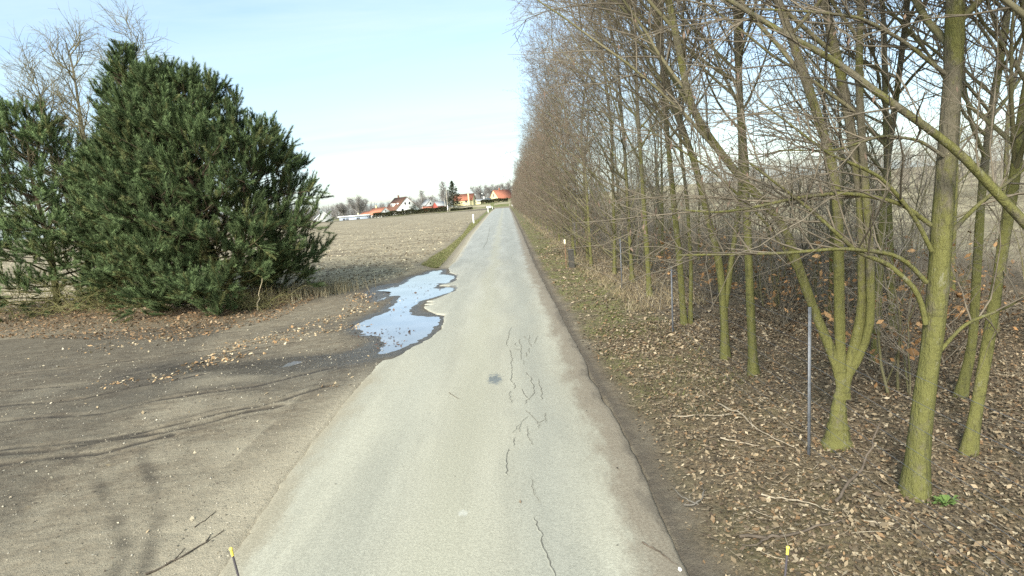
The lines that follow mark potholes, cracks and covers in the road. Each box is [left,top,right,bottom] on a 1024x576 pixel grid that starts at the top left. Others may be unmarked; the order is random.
crack [505,328,547,475]
crack [531,478,556,576]
